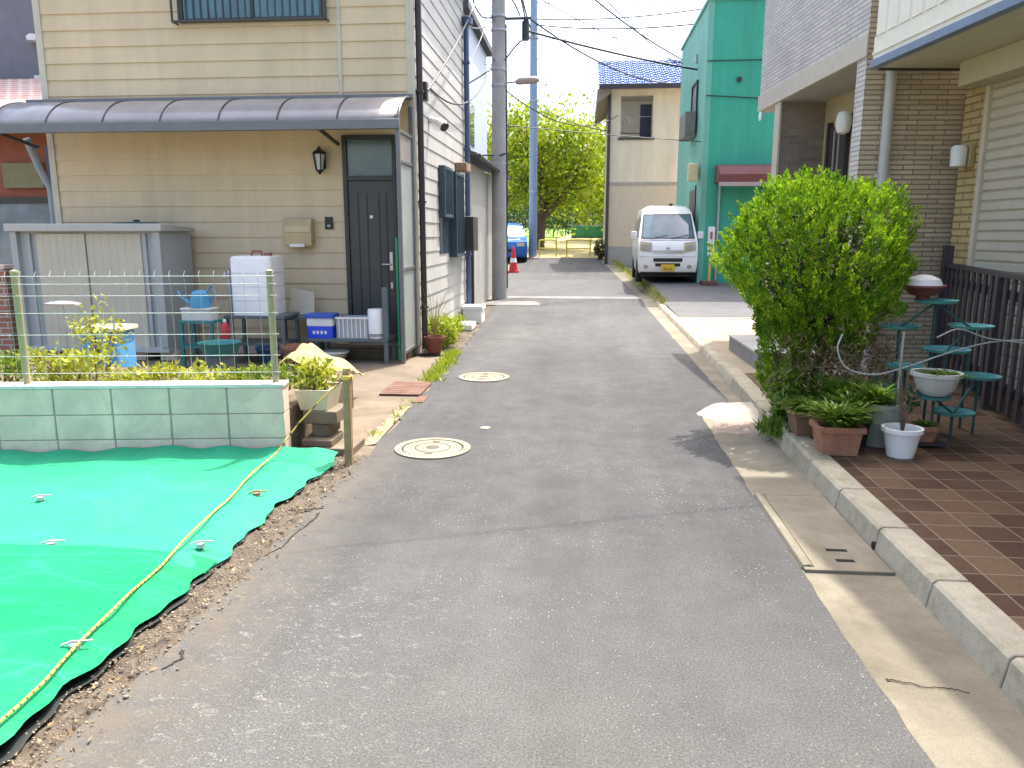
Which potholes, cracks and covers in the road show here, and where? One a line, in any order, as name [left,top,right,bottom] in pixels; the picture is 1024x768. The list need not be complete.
manhole cover [459,372,509,382]
manhole cover [394,438,471,459]
crack [886,678,970,693]
